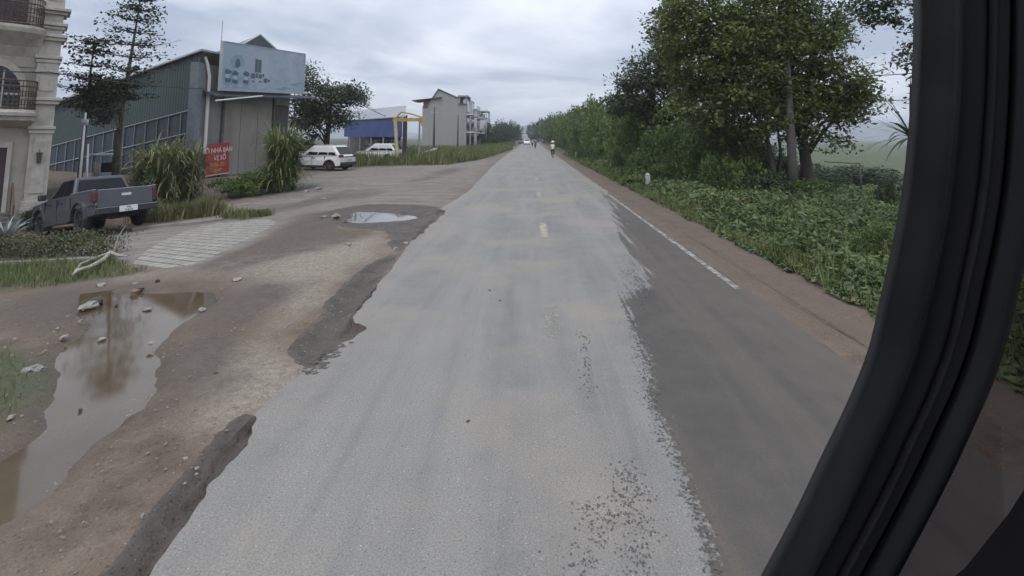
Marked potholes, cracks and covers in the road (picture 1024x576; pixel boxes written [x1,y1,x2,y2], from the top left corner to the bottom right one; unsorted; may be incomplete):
pothole [287,254,399,368]
pothole [99,414,257,576]
pothole [321,204,446,252]
